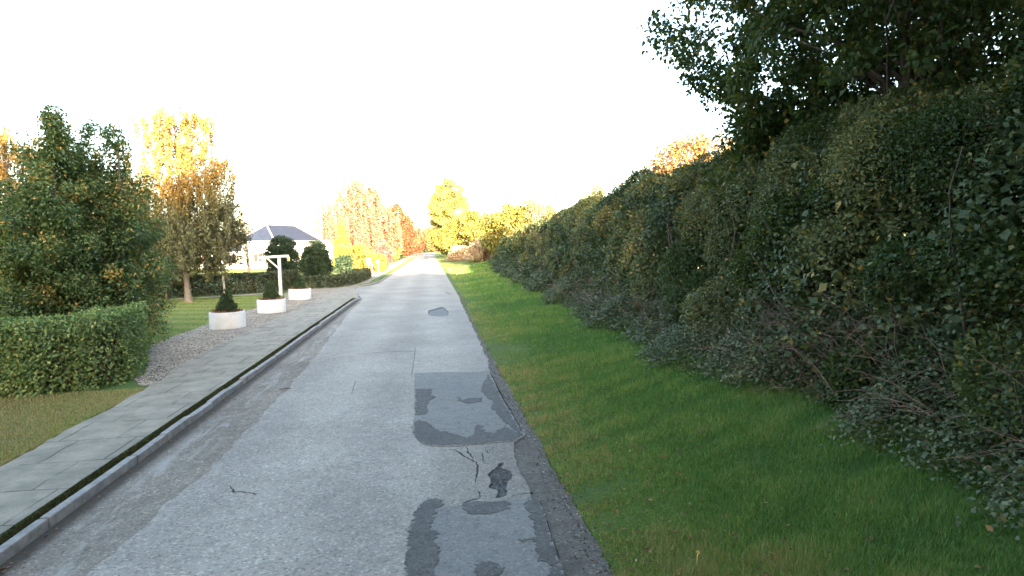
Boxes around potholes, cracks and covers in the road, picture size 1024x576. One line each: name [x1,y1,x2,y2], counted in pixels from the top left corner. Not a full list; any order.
crack [450,447,494,503]
